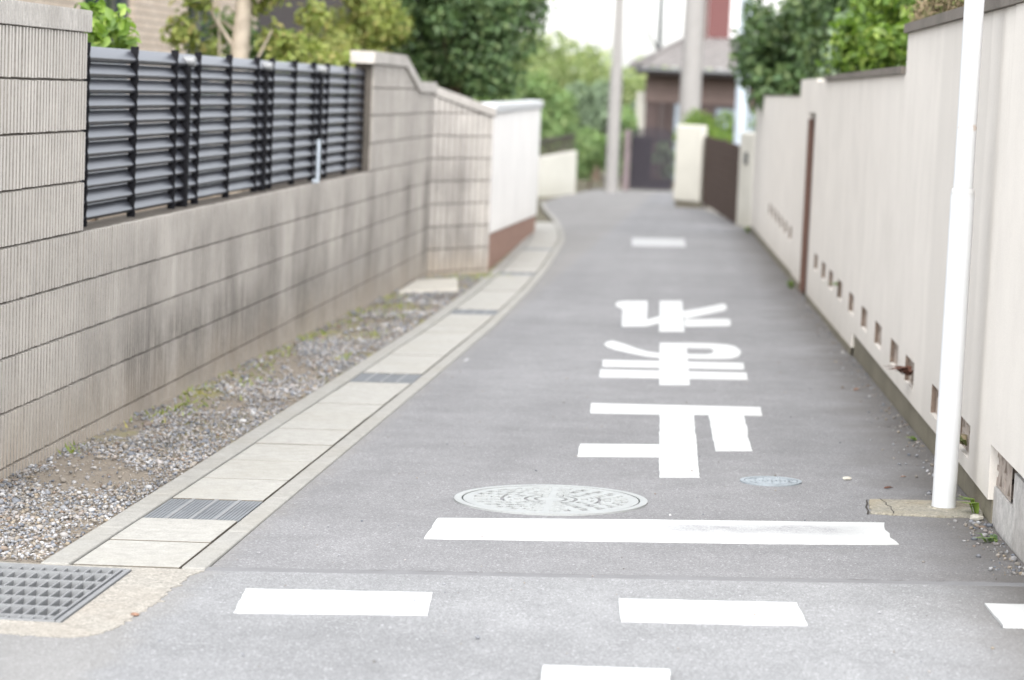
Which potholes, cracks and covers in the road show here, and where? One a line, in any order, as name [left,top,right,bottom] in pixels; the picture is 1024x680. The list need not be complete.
utility cover [740,476,802,486]
drain grate [143,499,263,523]
drain grate [349,373,422,384]
manhole cover [454,484,648,516]
